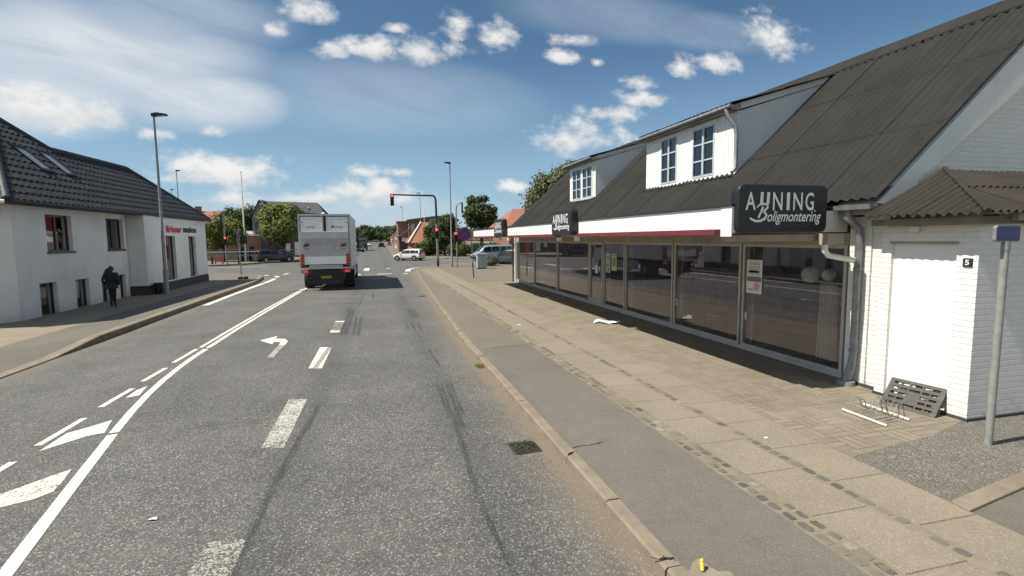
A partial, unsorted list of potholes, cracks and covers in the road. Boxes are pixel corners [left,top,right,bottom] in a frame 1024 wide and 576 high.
drain grate [508,441,542,455]
